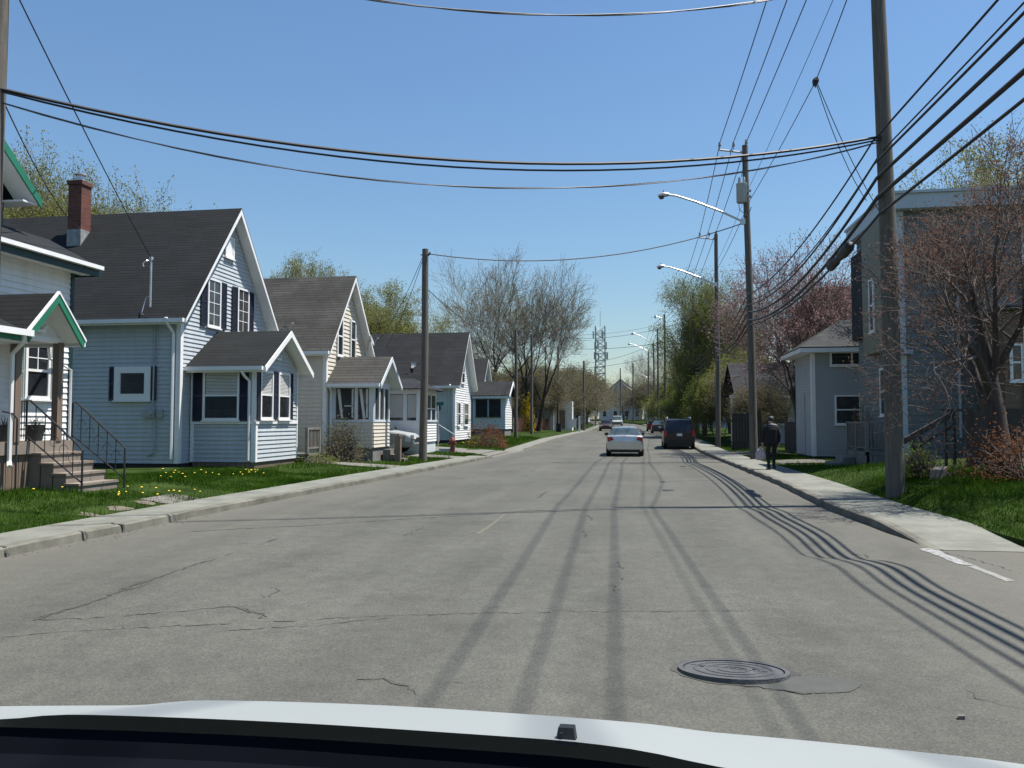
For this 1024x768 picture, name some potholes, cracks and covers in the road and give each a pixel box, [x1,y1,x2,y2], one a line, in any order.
crack [370,678,474,694]
crack [3,492,744,637]
manhole cover [670,658,801,685]
